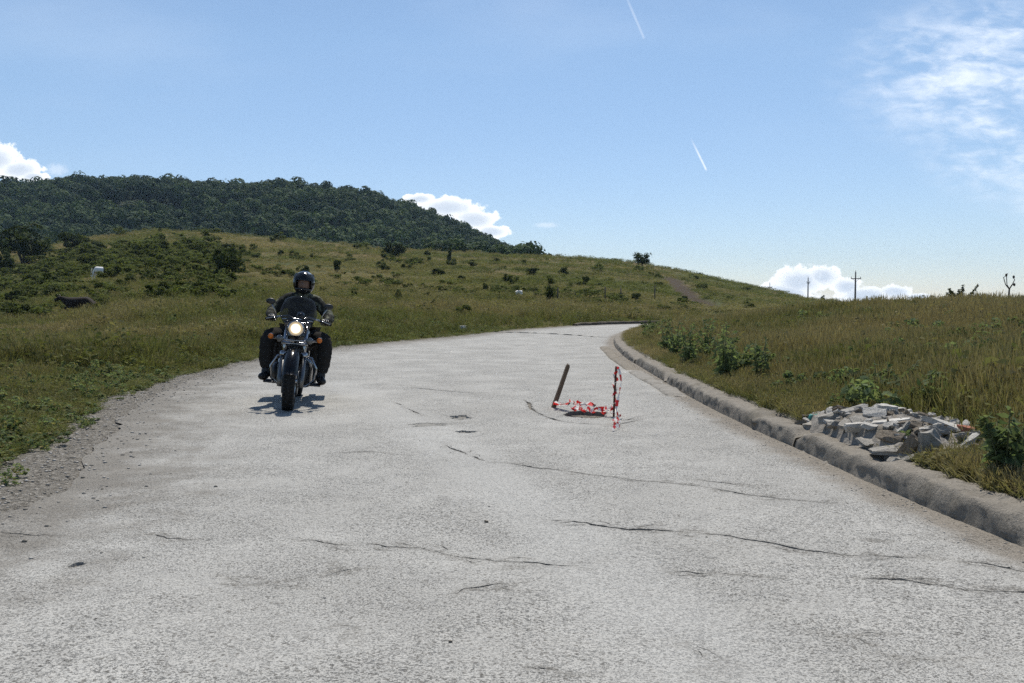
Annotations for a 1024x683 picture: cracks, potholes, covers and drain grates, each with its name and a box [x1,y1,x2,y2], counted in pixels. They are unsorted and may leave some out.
crack [678,571,1024,593]
crack [553,520,1024,572]
crack [1,532,581,567]
crack [492,461,821,503]
